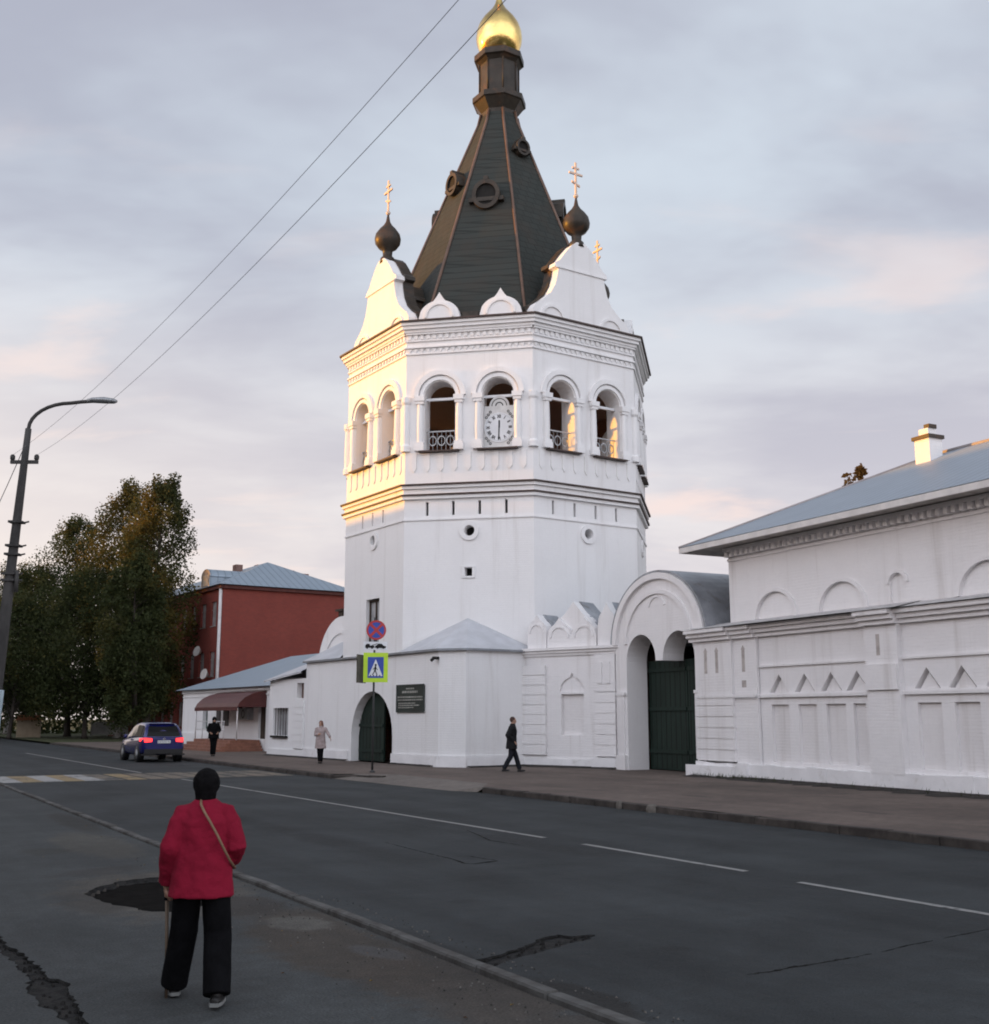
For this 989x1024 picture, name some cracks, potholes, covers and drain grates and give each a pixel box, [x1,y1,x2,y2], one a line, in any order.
crack [386,830,518,864]
crack [0,936,89,1024]
pothole [84,877,202,912]
crack [747,929,989,975]
